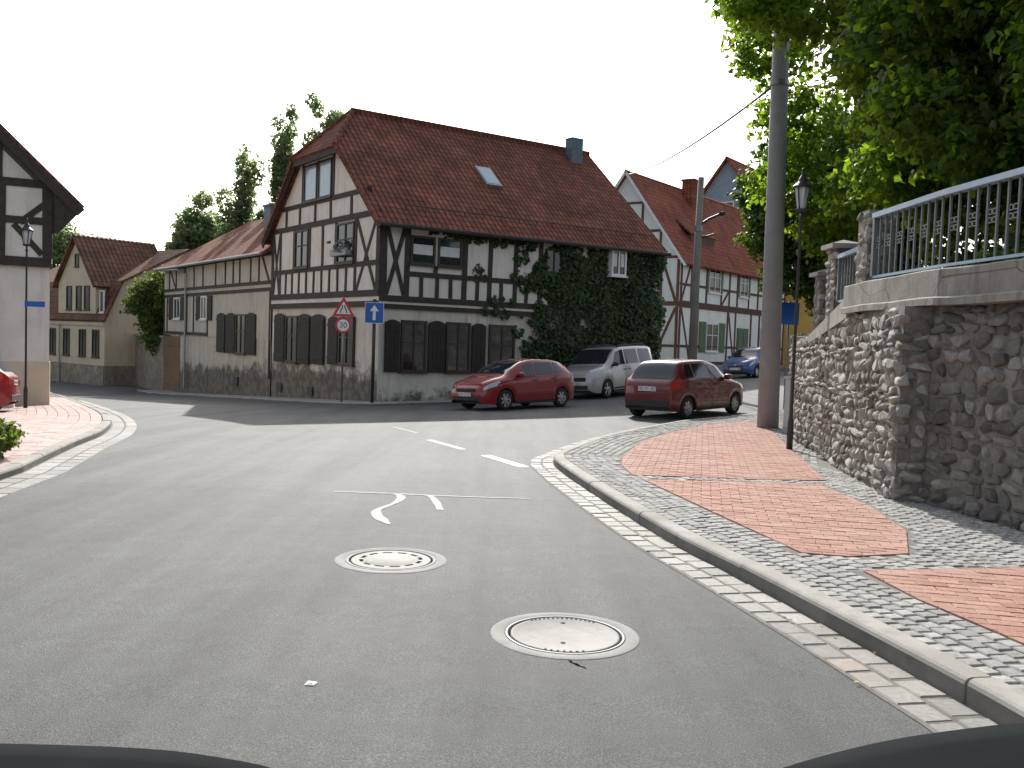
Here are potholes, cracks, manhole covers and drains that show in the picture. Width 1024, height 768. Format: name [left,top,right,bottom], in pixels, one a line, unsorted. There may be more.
manhole cover [334,547,447,574]
manhole cover [490,612,640,662]
